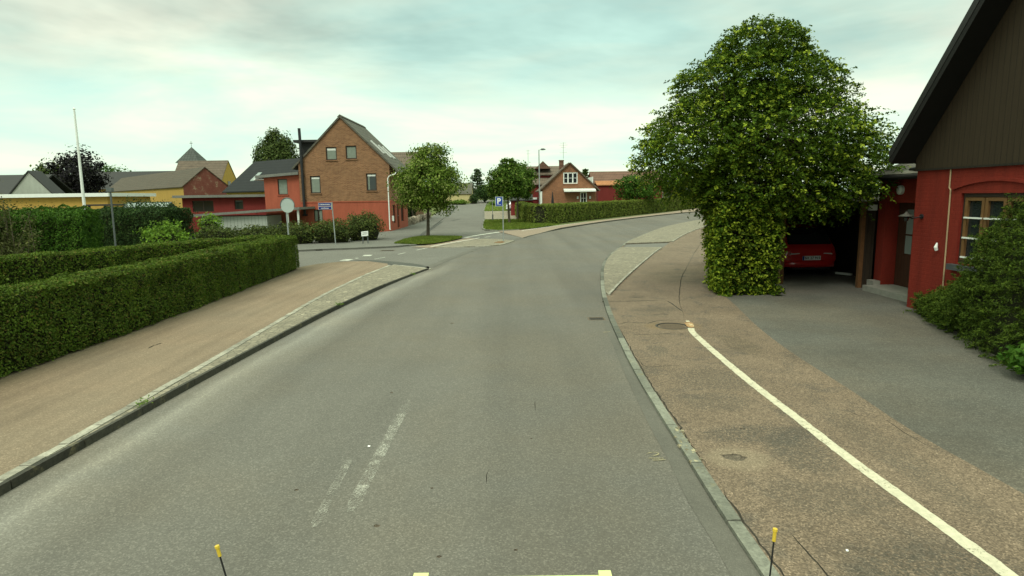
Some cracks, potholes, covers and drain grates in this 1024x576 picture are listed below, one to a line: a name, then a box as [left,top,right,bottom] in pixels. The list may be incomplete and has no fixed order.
crack [724,492,829,576]
